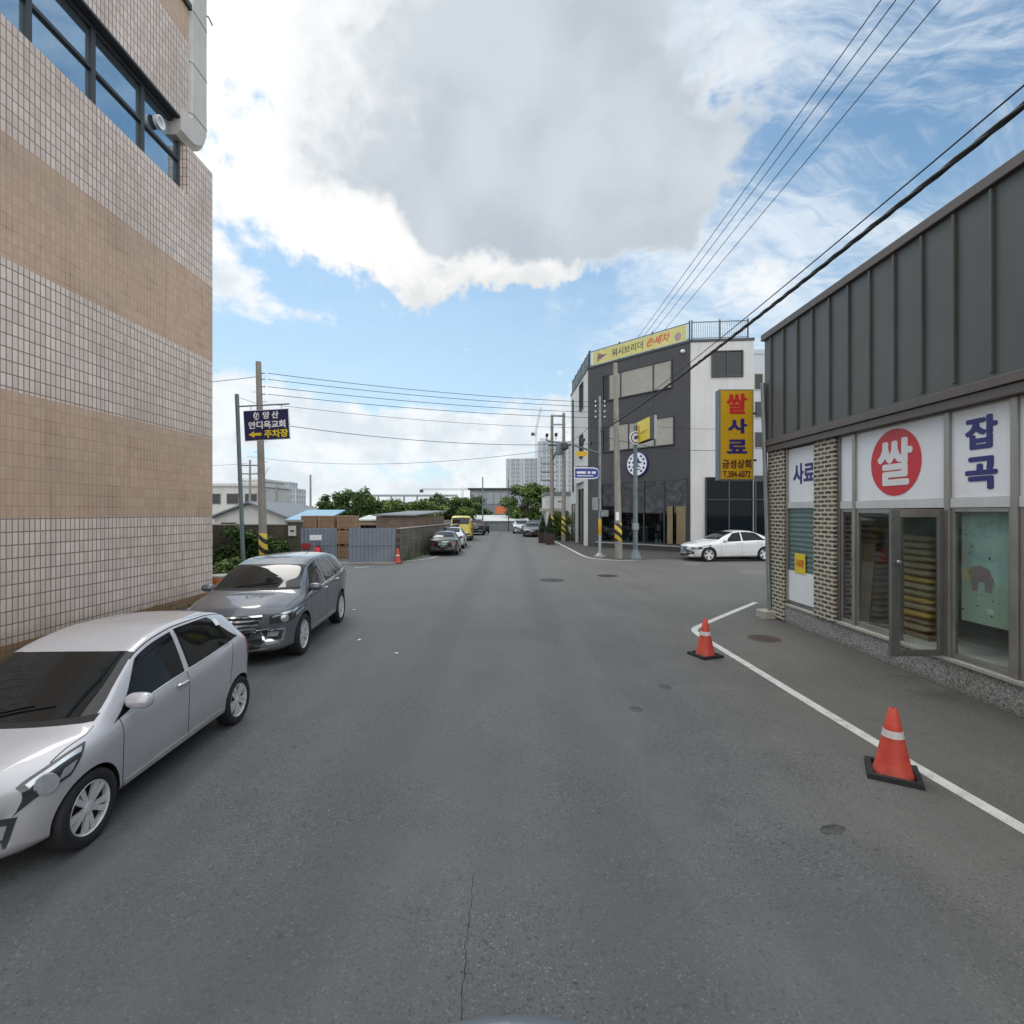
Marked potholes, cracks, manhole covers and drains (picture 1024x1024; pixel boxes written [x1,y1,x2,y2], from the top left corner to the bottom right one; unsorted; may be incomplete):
crack [461,881,473,1020]
manhole cover [745,634,785,643]
